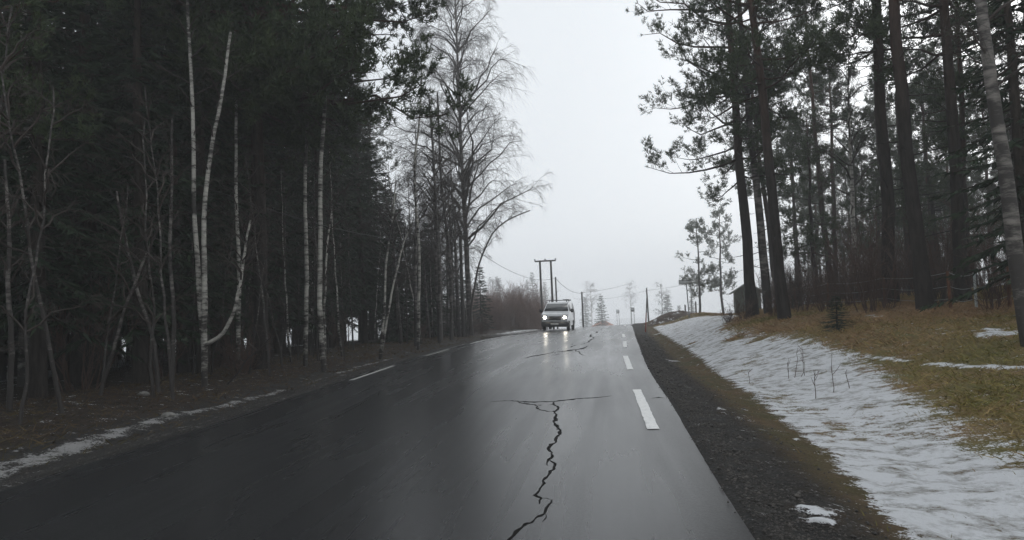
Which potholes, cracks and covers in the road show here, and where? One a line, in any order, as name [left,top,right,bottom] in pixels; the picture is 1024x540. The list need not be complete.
crack [492,396,608,540]
crack [527,330,602,358]
